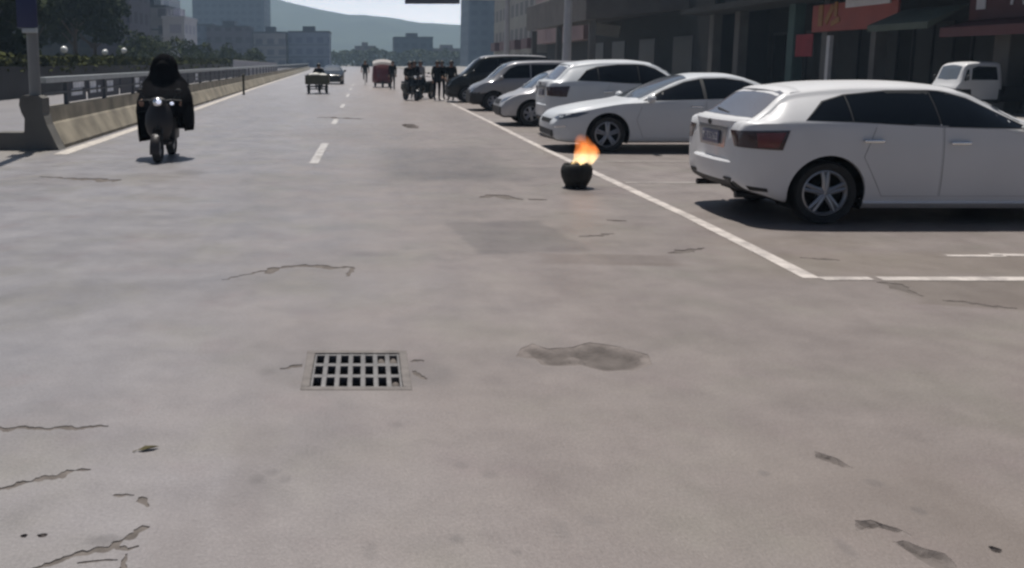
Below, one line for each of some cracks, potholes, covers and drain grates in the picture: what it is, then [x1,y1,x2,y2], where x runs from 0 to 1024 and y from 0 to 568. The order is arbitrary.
drain grate [300,350,412,390]
crack [113,494,149,507]
crack [221,264,355,280]
crack [34,525,150,568]
crack [0,468,91,490]
crack [877,282,1017,309]
pothole [855,520,910,535]
pothole [815,451,852,468]
pothole [516,342,652,371]
crack [579,220,624,237]
pothole [894,541,957,568]
